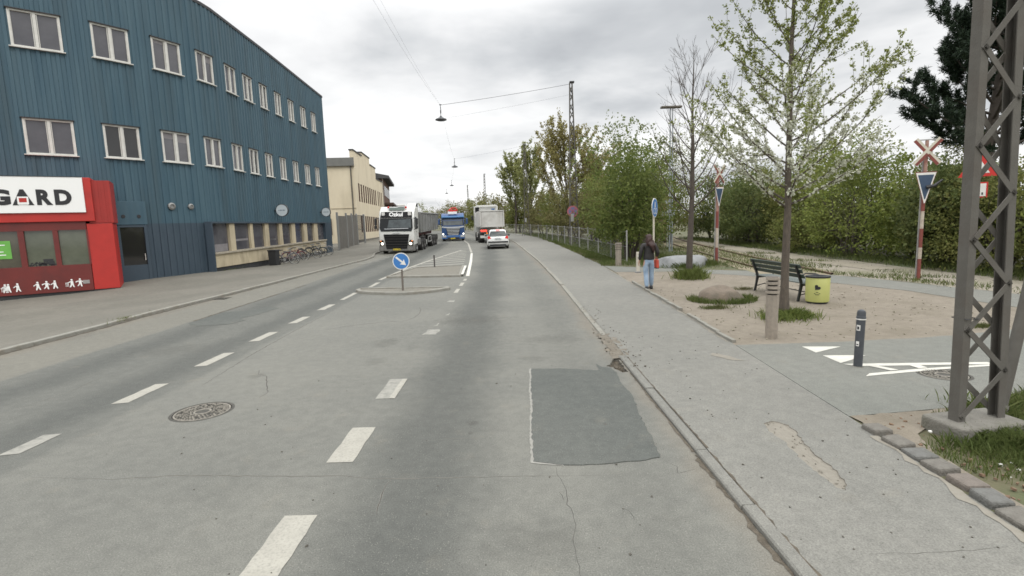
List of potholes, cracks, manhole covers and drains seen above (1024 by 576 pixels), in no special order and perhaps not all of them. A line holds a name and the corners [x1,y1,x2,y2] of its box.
manhole cover [916,368,974,381]
pothole [764,421,847,490]
pothole [607,359,628,372]
manhole cover [168,402,235,422]
